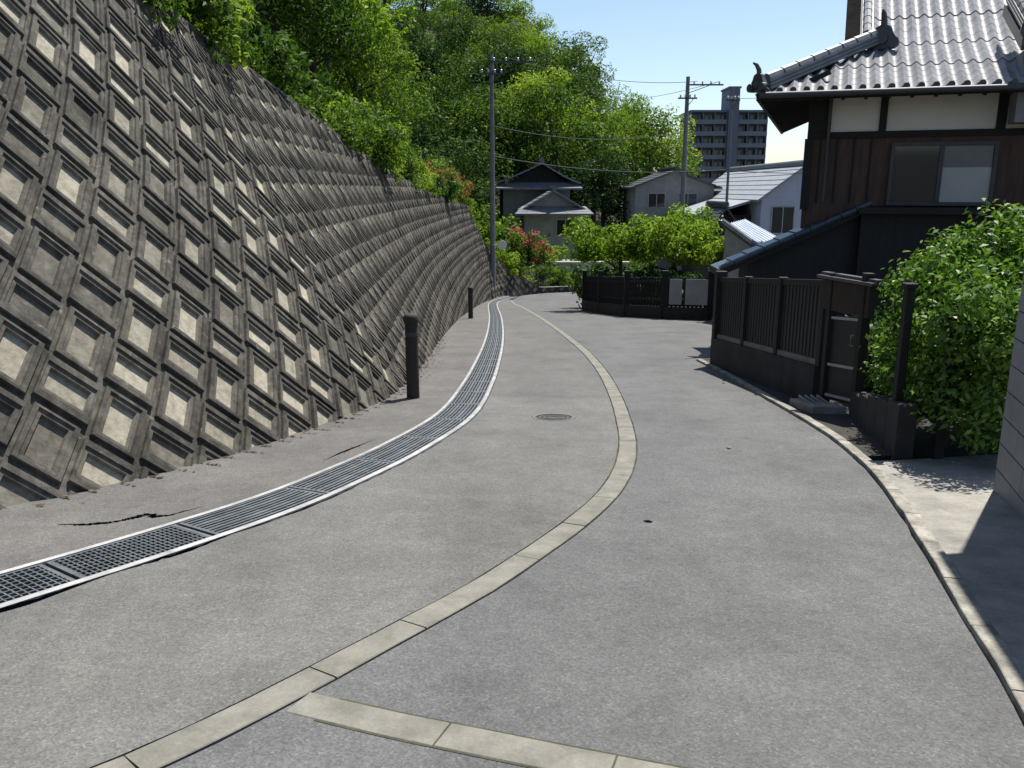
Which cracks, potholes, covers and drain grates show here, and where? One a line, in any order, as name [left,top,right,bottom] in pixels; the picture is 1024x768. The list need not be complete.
drain grate [404,418,465,439]
drain grate [459,382,491,392]
drain grate [450,392,486,404]
drain grate [434,404,479,420]
crack [0,441,442,613]
drain grate [288,459,393,494]
drain grate [357,436,436,463]
drain grate [0,564,75,604]
drain grate [179,487,325,536]
drain grate [466,373,494,382]
manhole cover [533,413,575,421]
drain grate [46,524,211,580]
